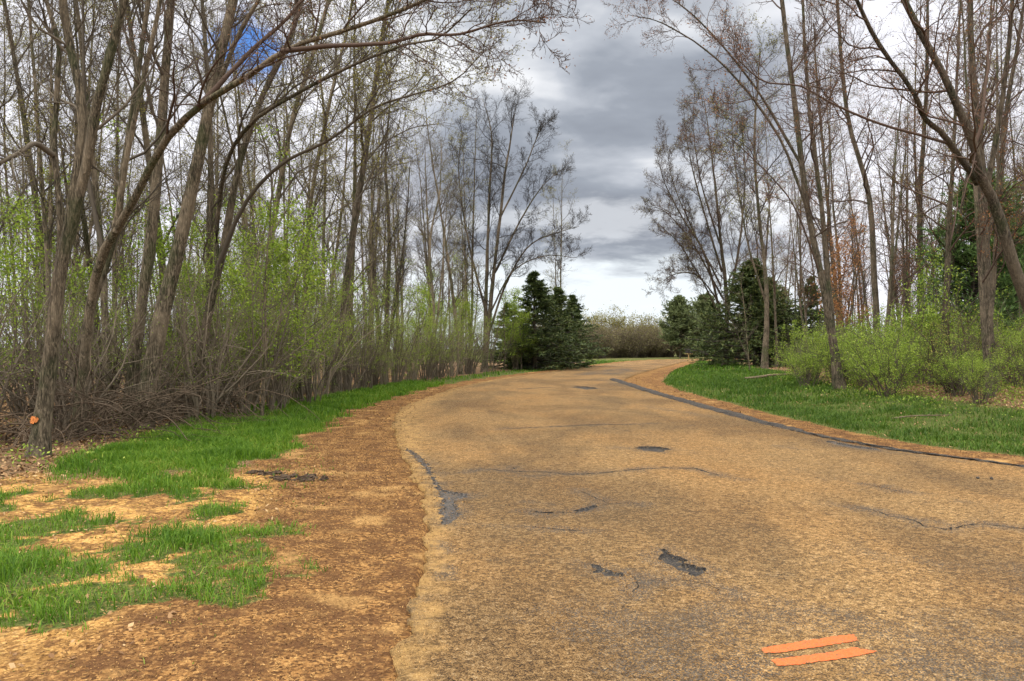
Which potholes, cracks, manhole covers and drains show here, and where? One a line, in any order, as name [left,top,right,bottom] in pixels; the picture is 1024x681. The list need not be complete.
crack [478,467,735,506]
pothole [589,563,624,577]
pothole [658,549,706,577]
crack [838,505,1024,530]
pothole [405,447,469,525]
